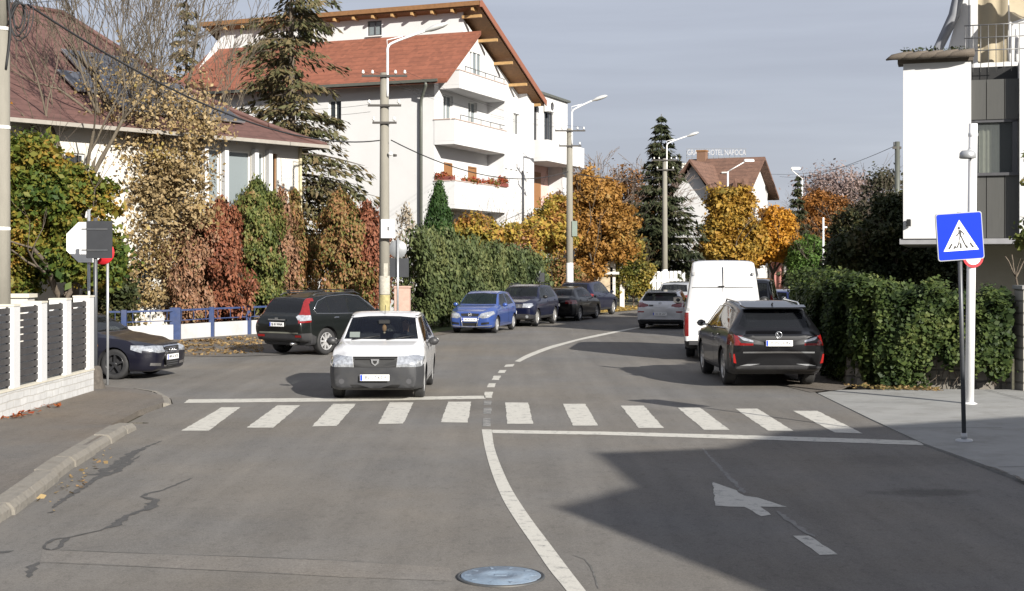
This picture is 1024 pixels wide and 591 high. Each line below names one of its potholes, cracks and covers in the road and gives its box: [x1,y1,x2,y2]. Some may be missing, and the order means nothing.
crack [574,555,598,587]
manhole cover [457,566,545,588]
